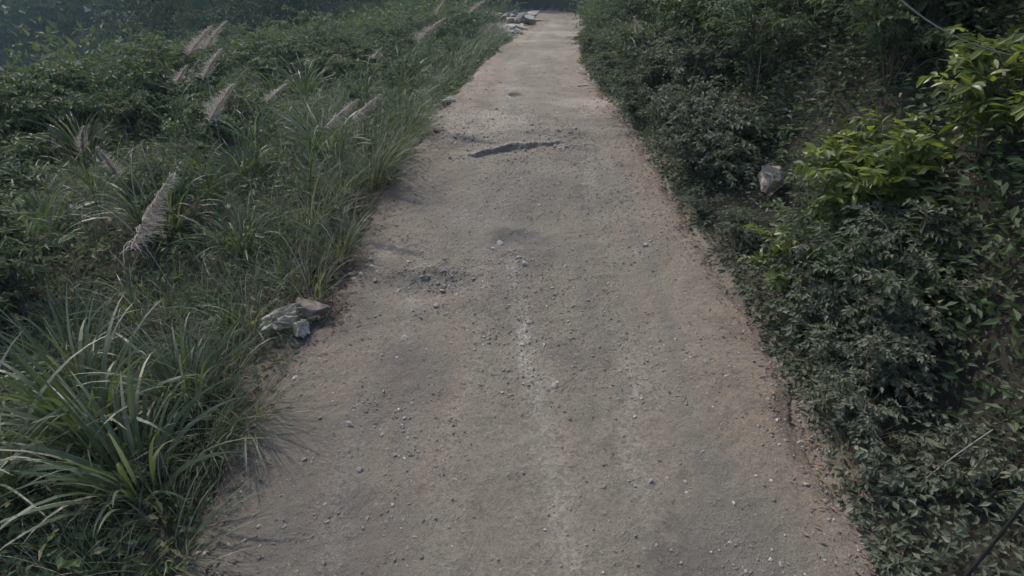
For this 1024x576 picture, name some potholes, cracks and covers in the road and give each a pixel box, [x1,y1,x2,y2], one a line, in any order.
pothole [472,141,564,159]
pothole [375,263,500,301]
